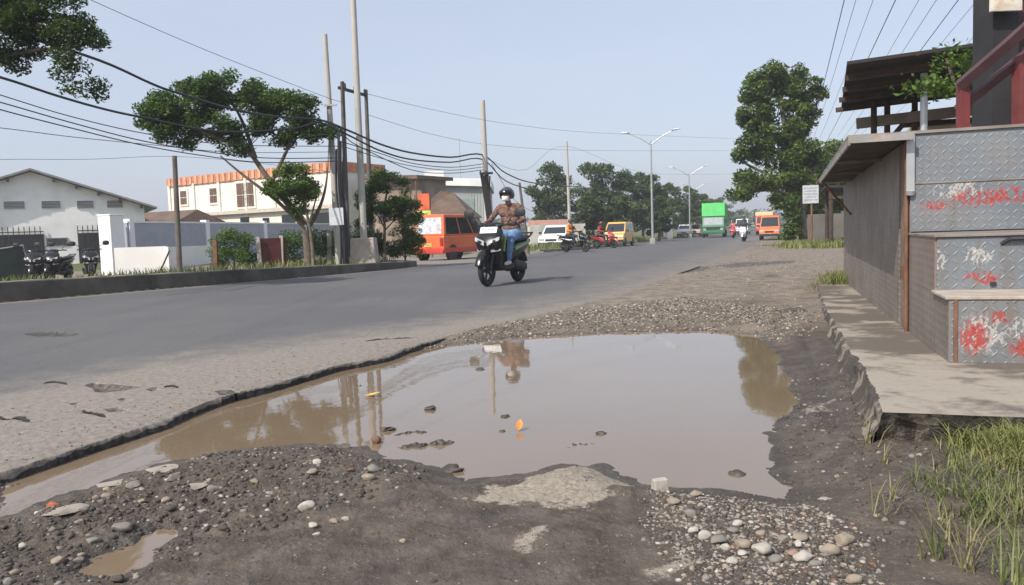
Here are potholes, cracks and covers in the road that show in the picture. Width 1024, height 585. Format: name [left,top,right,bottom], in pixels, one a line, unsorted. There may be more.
pothole [66,520,191,579]
pothole [0,329,805,518]
